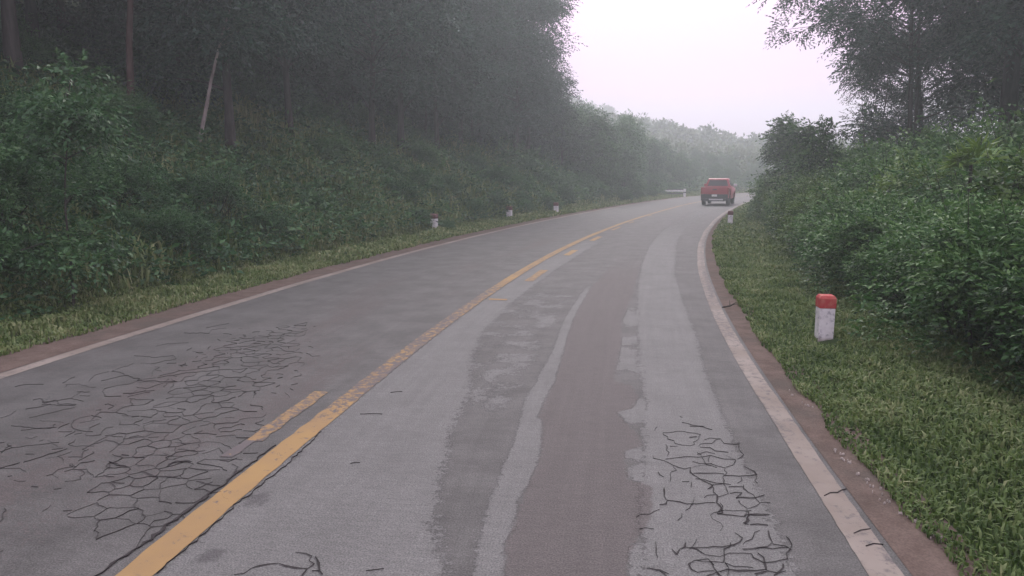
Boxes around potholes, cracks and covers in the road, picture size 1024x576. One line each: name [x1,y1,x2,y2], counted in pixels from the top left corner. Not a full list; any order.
crack [637,417,792,576]
crack [234,552,323,576]
crack [824,488,883,546]
